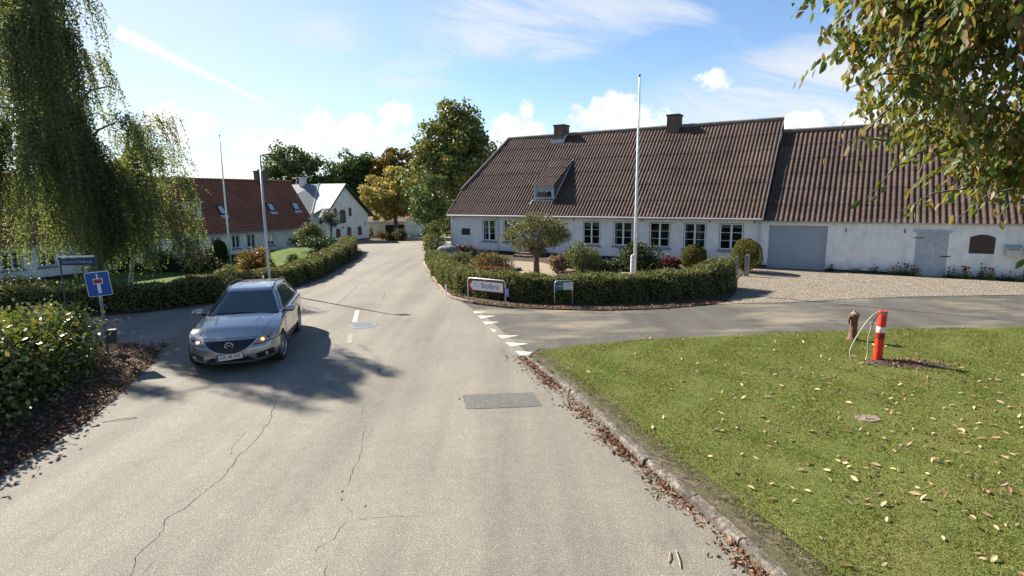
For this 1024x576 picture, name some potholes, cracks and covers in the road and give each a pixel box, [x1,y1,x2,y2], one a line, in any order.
crack [130,397,280,576]
crack [316,411,391,574]
